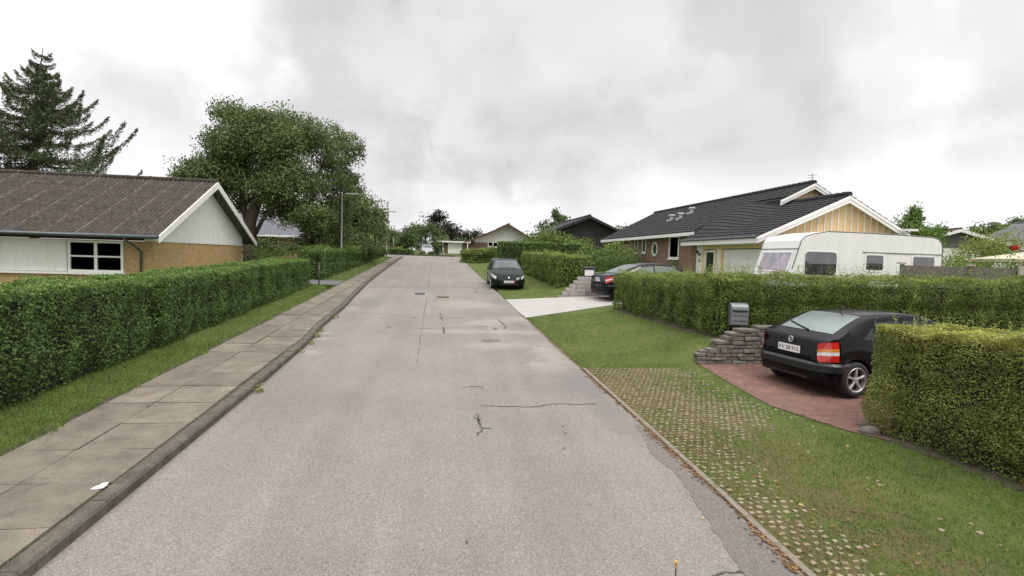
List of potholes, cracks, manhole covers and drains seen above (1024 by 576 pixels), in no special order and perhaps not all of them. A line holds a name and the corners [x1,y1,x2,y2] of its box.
crack [461,386,590,436]
